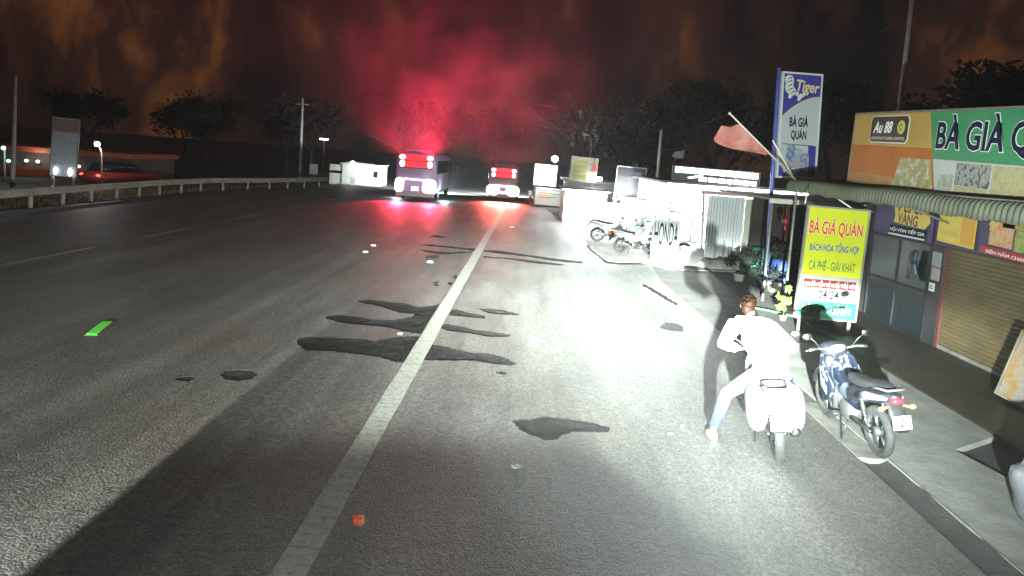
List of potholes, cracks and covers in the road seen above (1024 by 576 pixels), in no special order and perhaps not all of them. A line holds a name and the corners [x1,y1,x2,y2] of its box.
pothole [220,369,258,381]
pothole [326,300,511,337]
pothole [513,416,610,440]
pothole [659,322,684,332]
crack [642,284,678,306]
